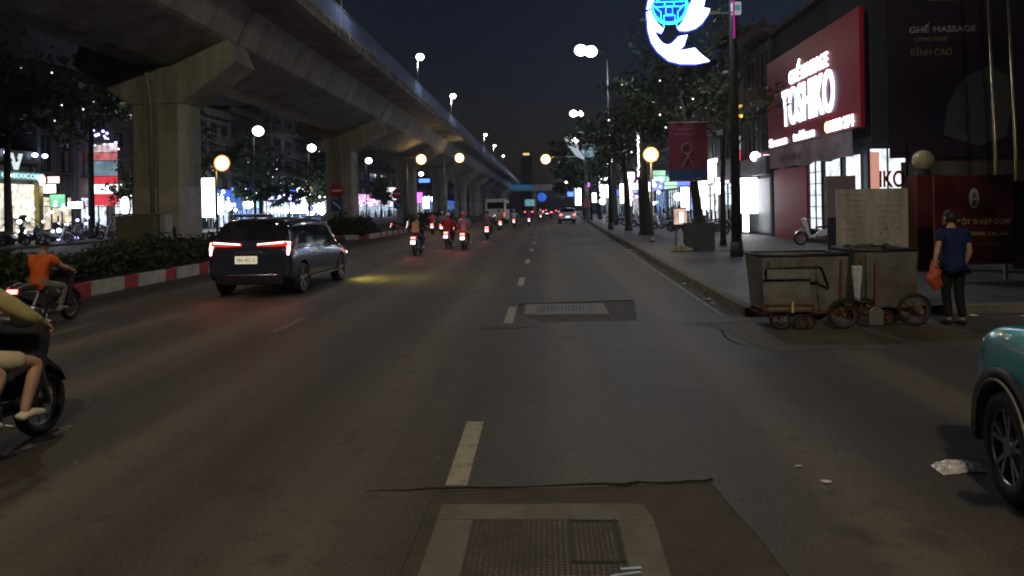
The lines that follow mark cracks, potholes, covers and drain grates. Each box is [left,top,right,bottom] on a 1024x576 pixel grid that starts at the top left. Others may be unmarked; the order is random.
manhole cover [418,503,671,576]
